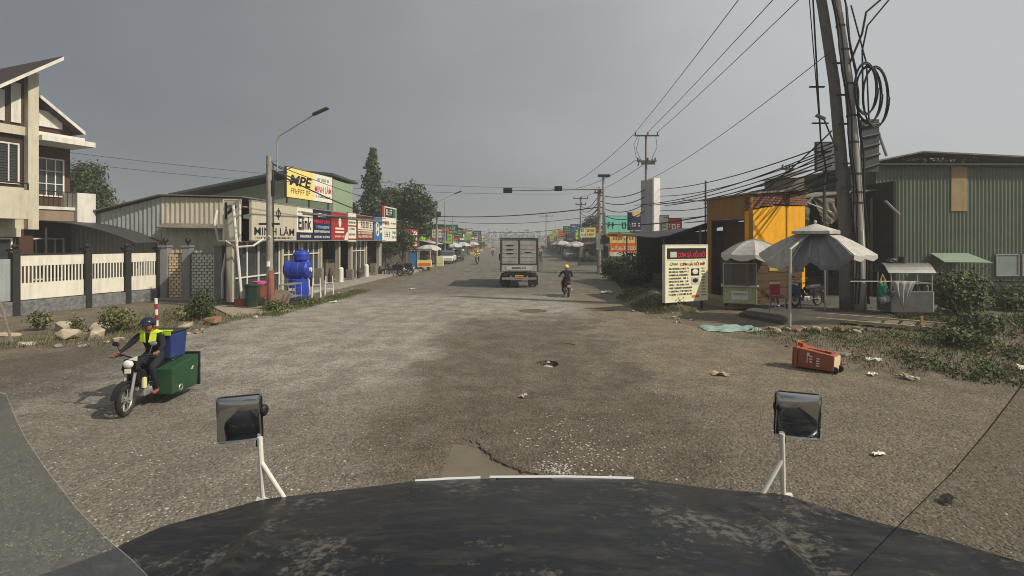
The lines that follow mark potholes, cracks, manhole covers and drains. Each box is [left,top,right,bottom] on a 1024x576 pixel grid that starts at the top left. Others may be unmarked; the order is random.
pothole [427,436,538,479]
